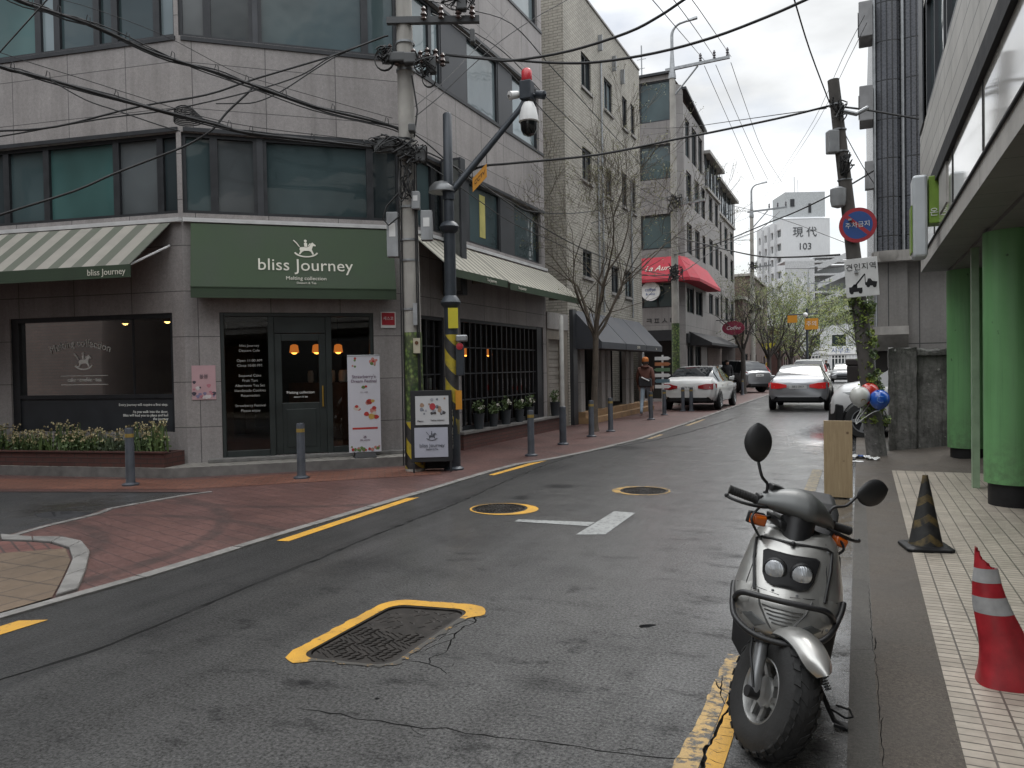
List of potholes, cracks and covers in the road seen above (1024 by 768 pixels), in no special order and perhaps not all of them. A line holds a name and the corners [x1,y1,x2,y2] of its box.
crack [406,616,485,674]
crack [296,679,730,768]
manhole cover [472,504,527,514]
manhole cover [306,606,466,664]
